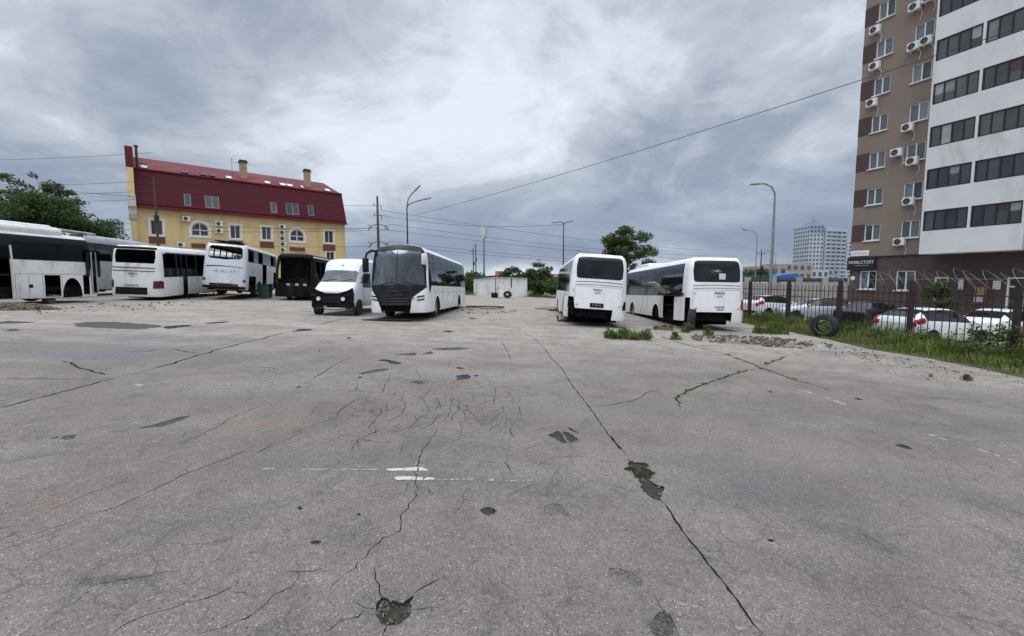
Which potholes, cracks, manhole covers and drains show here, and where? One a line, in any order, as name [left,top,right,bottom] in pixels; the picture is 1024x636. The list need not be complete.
pothole [649,611,675,636]
pothole [375,595,414,626]
pothole [624,459,665,501]
crack [36,361,538,636]
pothole [548,431,567,443]
